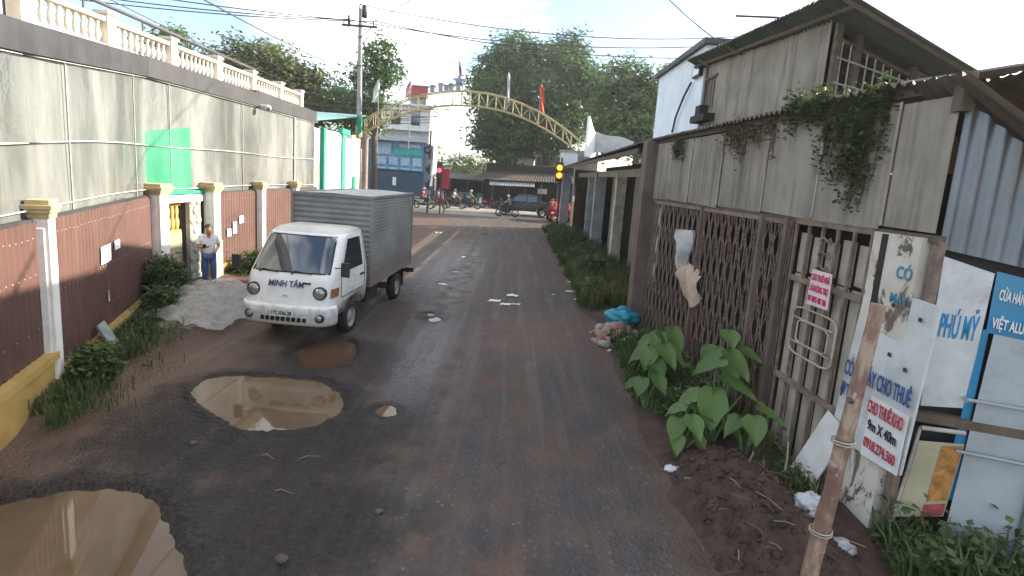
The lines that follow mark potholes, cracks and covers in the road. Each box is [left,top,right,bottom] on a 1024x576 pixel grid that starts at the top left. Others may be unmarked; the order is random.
pothole [368,403,403,419]
pothole [284,337,368,371]
pothole [0,474,212,576]
pothole [180,370,360,438]
